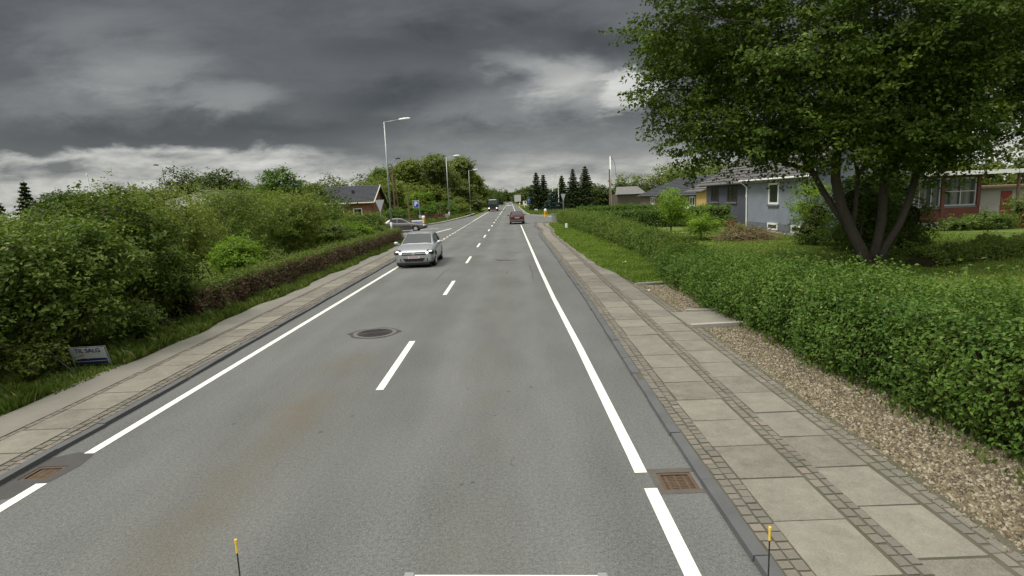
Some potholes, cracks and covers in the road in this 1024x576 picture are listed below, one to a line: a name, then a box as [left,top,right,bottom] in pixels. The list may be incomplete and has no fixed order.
manhole cover [348,327,402,339]
drain grate [647,468,707,494]
drain grate [0,452,94,500]
